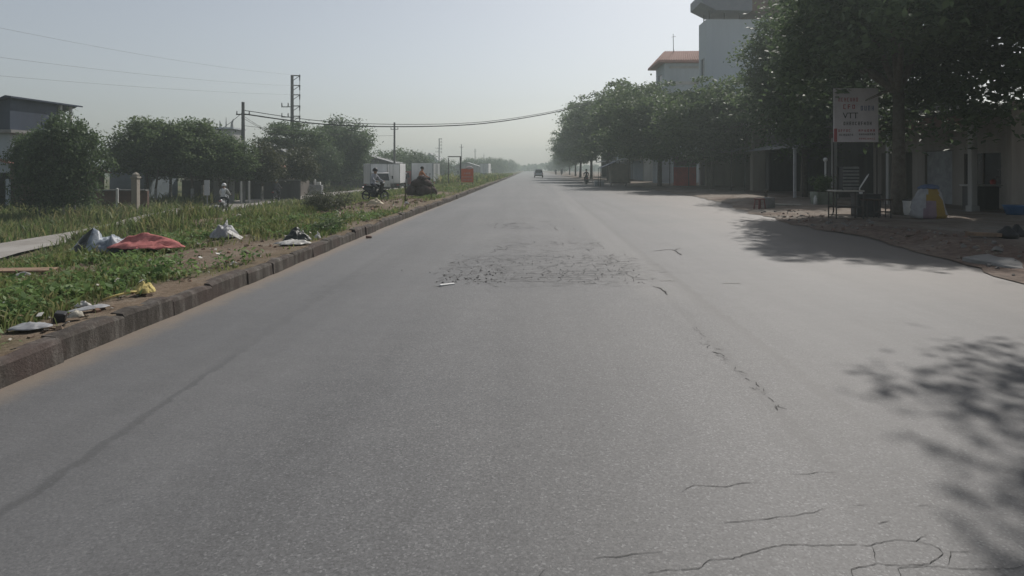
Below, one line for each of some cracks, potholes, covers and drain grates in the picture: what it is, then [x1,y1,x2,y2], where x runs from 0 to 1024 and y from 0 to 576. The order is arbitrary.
crack [429,223,654,287]
crack [645,521,1023,575]
